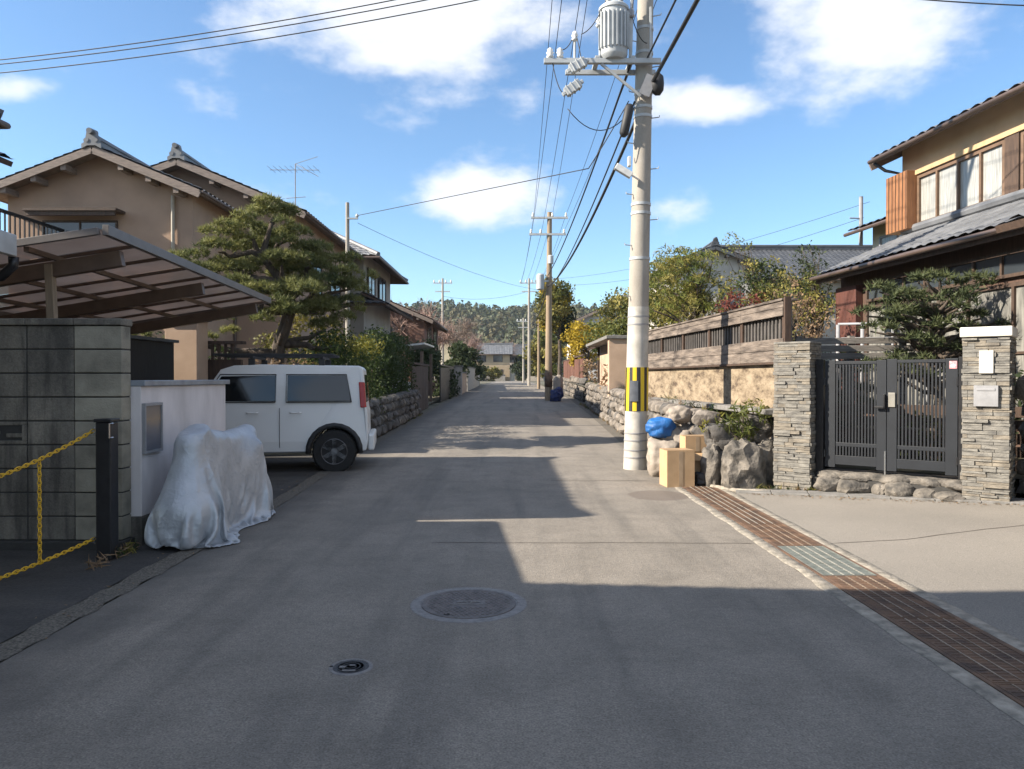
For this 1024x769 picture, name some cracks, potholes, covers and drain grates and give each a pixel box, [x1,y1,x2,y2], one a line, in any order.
drain grate [778,546,877,576]
manhole cover [410,587,527,623]
manhole cover [328,659,373,676]
